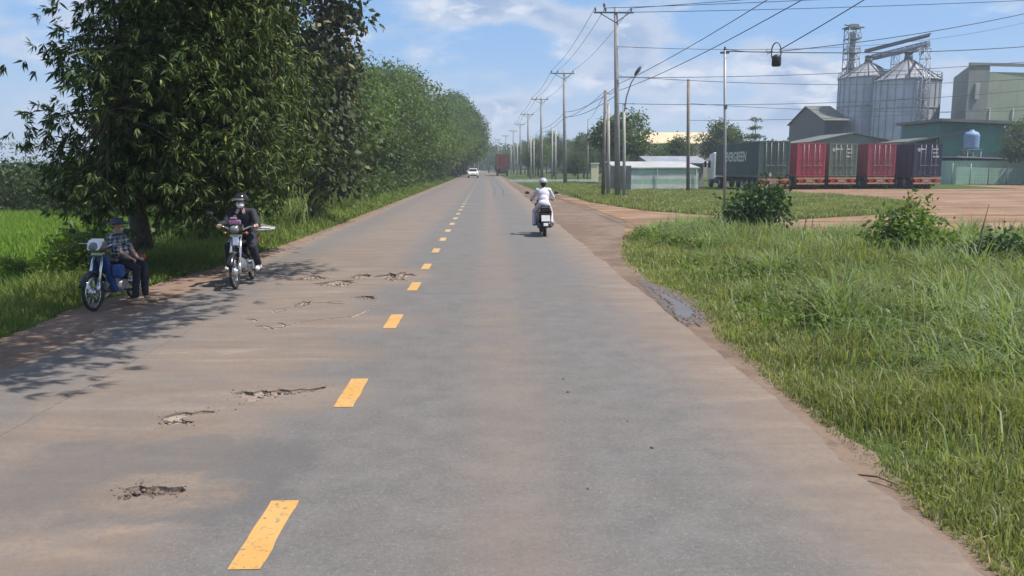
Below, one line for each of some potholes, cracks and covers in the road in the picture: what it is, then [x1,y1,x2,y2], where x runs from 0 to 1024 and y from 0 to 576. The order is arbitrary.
pothole [371,270,415,284]
pothole [153,407,237,430]
pothole [313,279,354,289]
crack [0,257,371,437]
pothole [111,480,188,500]
pothole [227,384,334,404]
